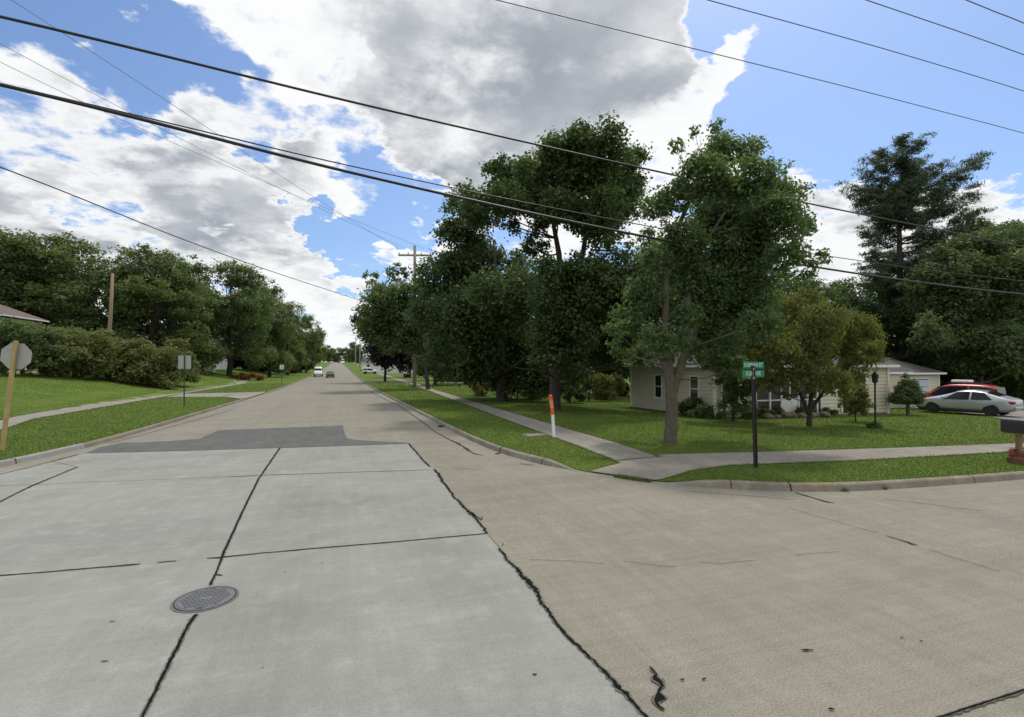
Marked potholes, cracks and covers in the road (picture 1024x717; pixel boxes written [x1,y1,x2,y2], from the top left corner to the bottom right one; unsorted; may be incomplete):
crack [408,440,503,547]
manhole cover [170,586,239,613]
